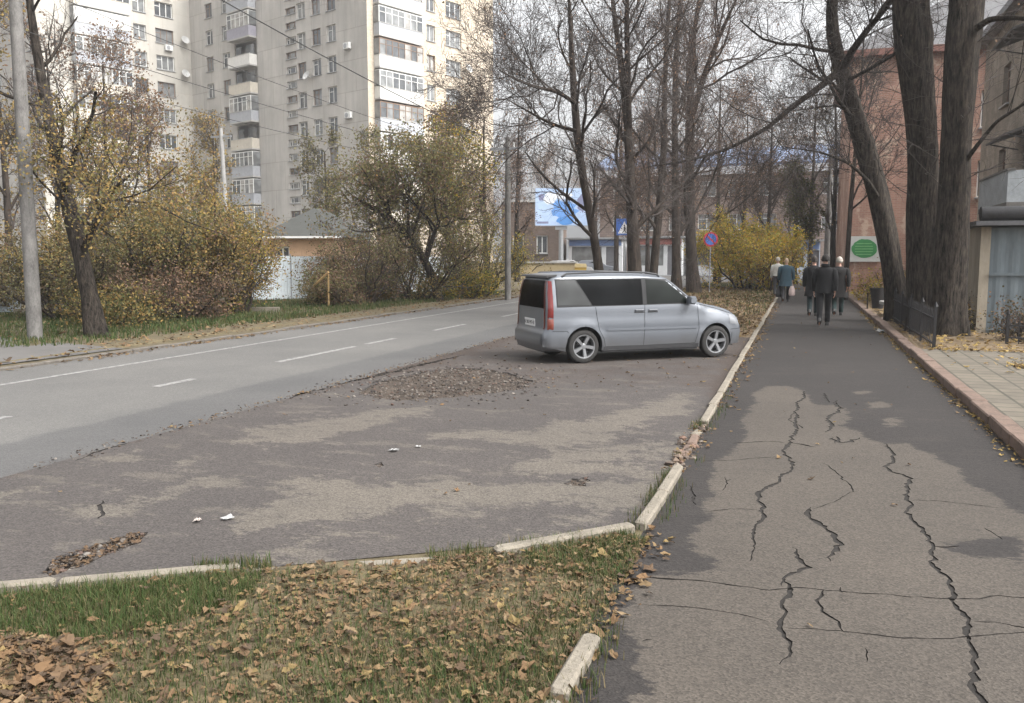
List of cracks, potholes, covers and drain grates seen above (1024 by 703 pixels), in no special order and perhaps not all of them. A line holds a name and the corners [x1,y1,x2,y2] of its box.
crack [97,501,105,519]
pothole [43,531,148,576]
pothole [563,476,590,486]
crack [636,391,1024,703]
pothole [359,367,533,402]
